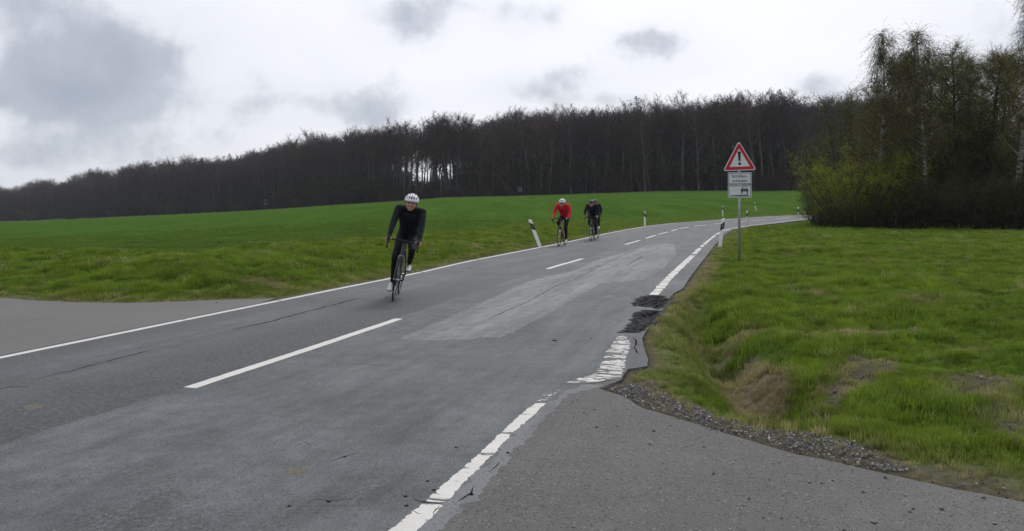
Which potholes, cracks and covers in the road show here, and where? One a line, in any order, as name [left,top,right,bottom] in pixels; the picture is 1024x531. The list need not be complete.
crack [232,299,355,330]
crack [486,251,643,319]
crack [412,462,500,514]
pothole [617,310,663,333]
pothole [630,295,673,309]
crack [42,348,163,378]
